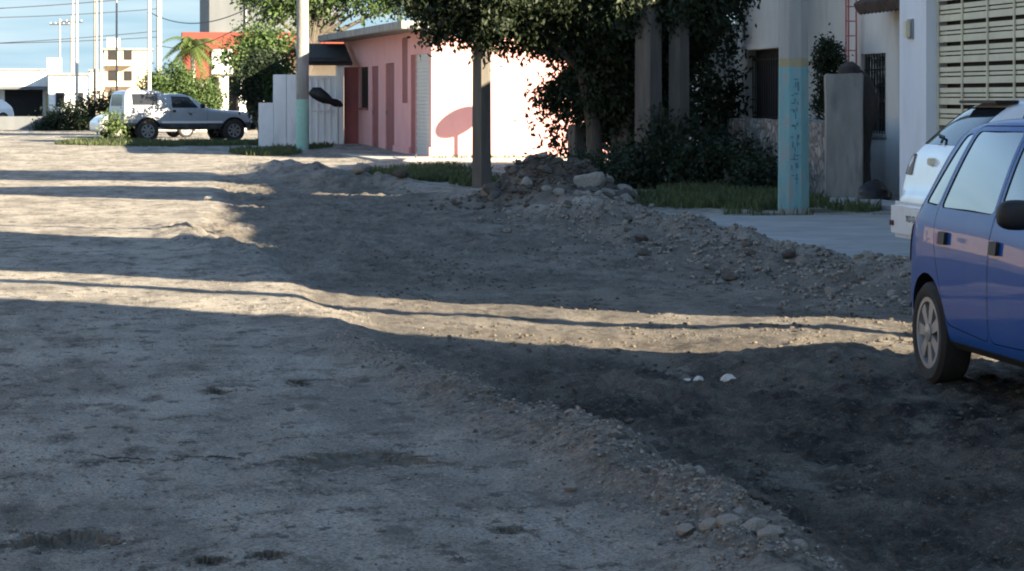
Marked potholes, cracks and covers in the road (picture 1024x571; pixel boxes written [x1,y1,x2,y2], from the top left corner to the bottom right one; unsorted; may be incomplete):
pothole [0,528,125,555]
pothole [188,555,230,567]
pothole [258,450,458,473]
pothole [243,549,294,560]
pothole [200,387,230,395]
pothole [286,378,309,387]
pothole [488,525,536,534]
